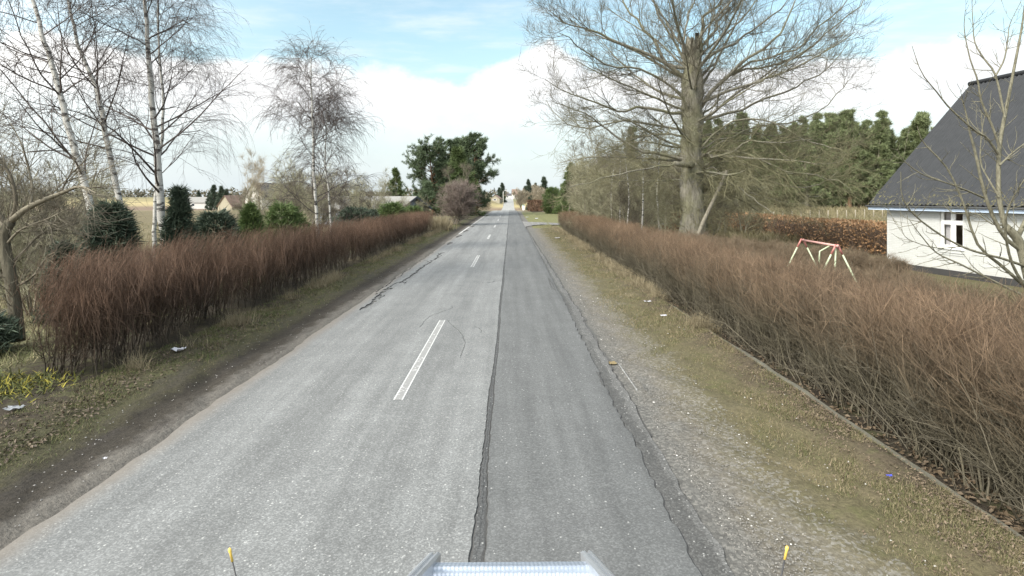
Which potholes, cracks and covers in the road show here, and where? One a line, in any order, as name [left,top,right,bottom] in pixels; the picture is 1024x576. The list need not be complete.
crack [359,252,445,310]
